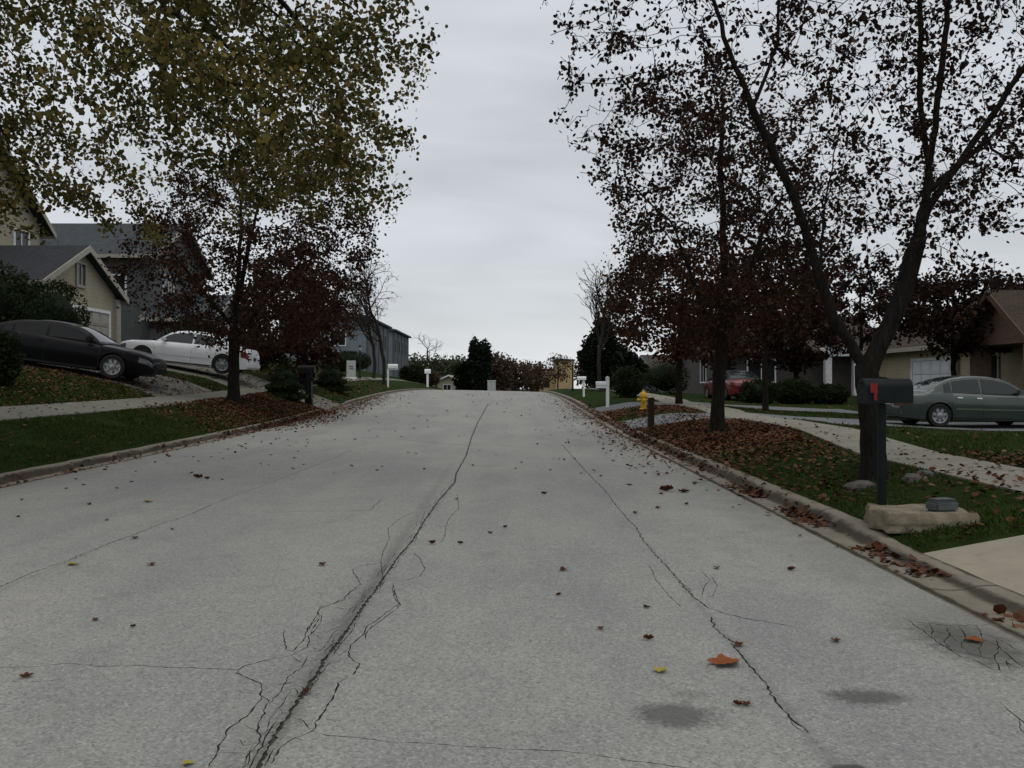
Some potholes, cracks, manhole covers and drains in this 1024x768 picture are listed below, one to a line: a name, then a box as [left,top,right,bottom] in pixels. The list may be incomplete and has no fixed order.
crack [312,731,686,768]
crack [562,445,809,734]
crack [0,450,351,587]
crack [0,663,243,682]
crack [903,617,1023,683]
